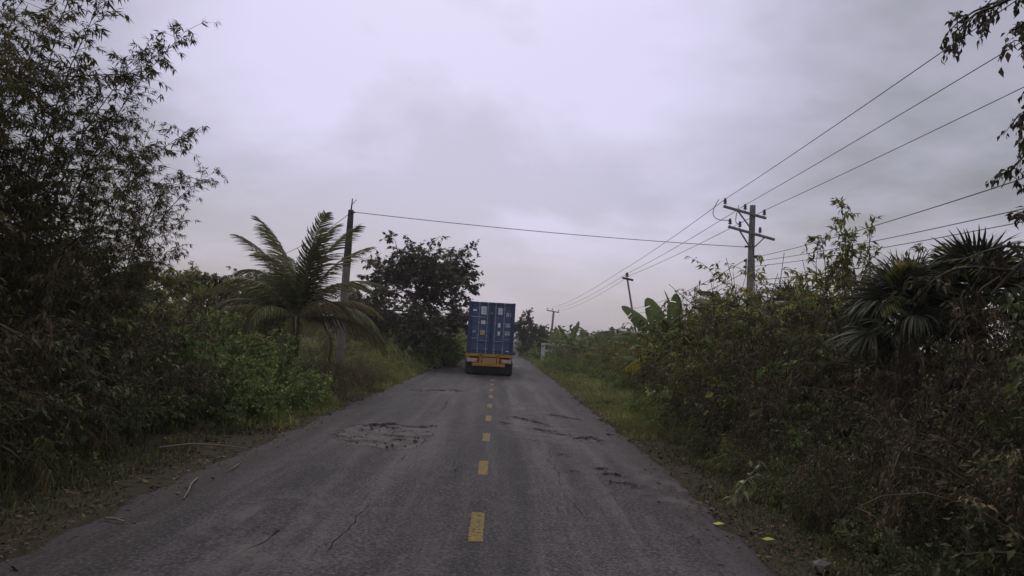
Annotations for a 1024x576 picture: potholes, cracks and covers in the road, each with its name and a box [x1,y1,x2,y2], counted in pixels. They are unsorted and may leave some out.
pothole [329,422,438,451]
crack [506,436,600,527]
crack [221,497,386,565]
